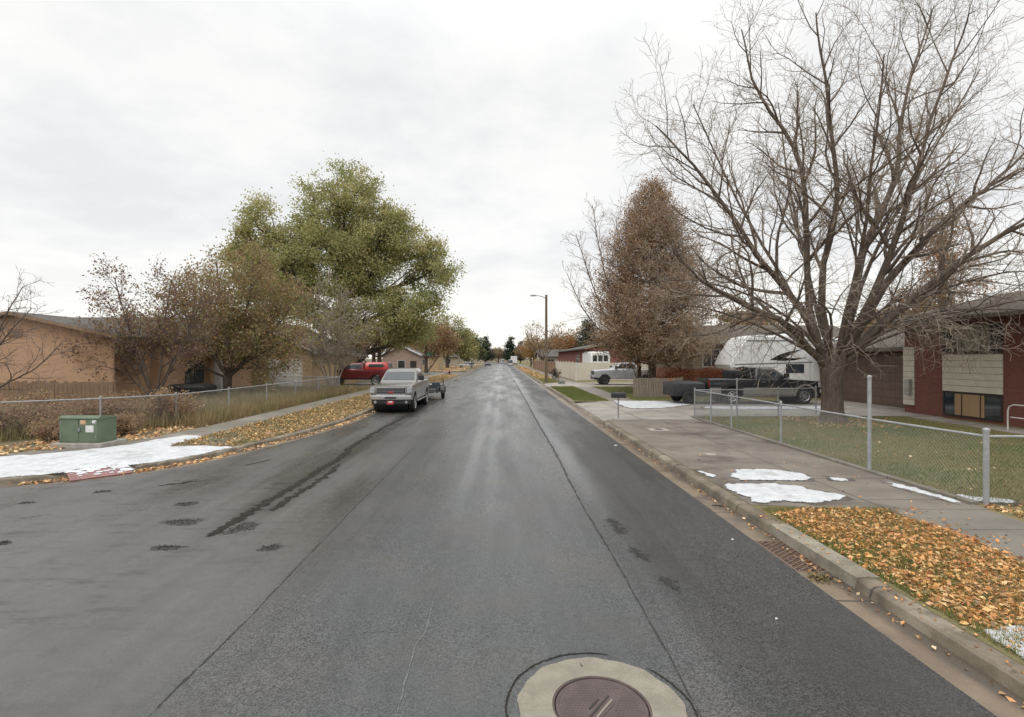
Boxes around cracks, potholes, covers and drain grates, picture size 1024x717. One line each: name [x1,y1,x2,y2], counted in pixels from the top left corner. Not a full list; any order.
manhole cover [552,676,653,717]
drain grate [755,541,828,572]
pothole [257,543,283,551]
